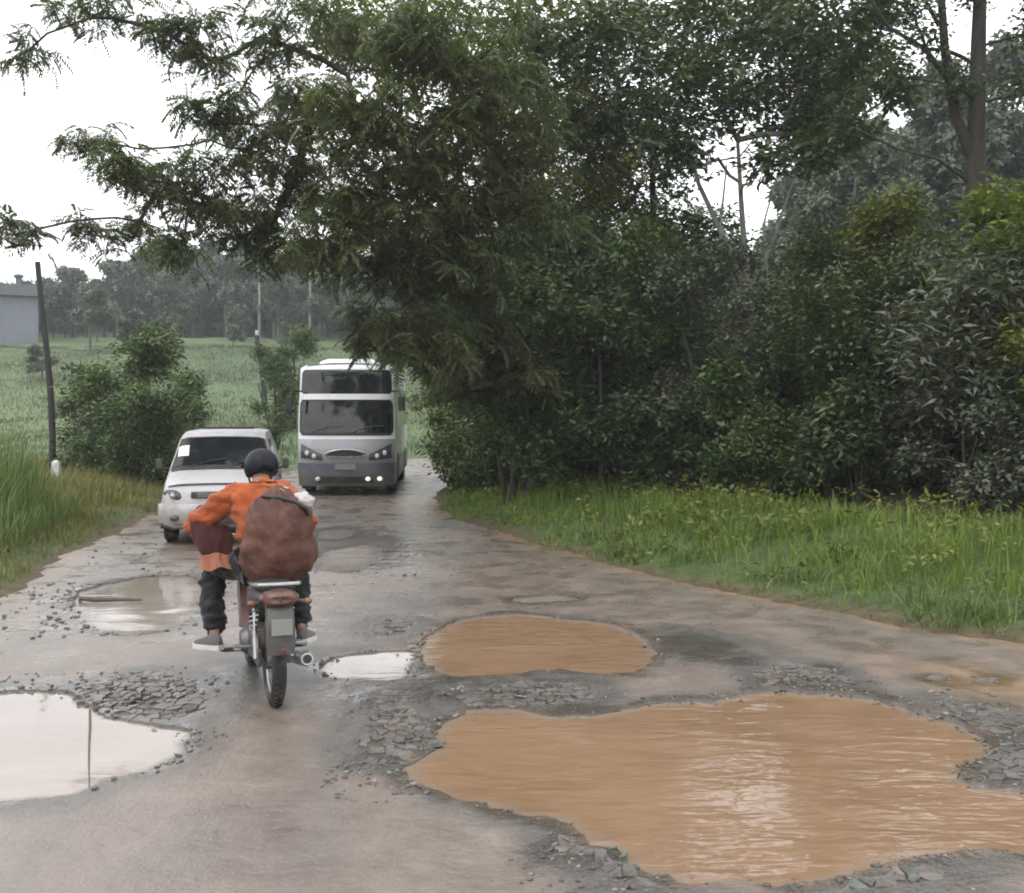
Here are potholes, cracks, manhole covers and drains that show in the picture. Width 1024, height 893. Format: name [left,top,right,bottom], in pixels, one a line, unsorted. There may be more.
crack [912,700,1024,782]
crack [76,670,213,720]
pothole [313,647,423,680]
pothole [64,574,201,635]
pothole [398,683,1024,887]
pothole [410,612,667,676]
pothole [0,685,201,802]
crack [352,706,445,766]
